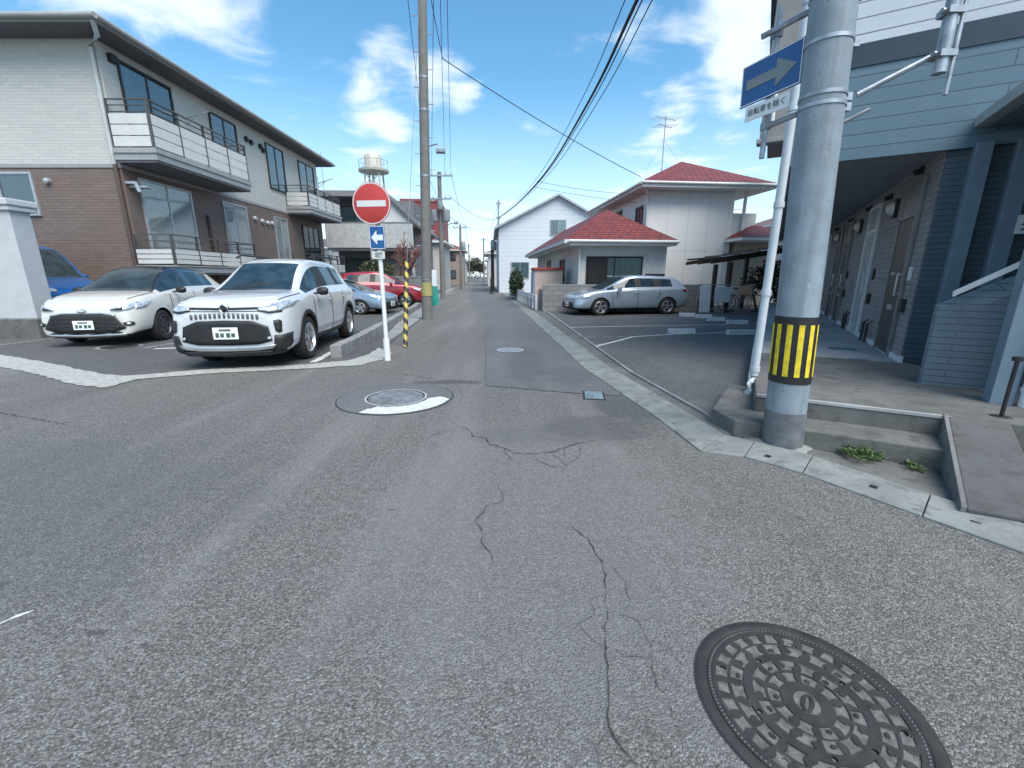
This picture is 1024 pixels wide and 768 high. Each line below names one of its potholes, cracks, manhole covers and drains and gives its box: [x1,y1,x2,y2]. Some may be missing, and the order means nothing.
crack [475,483,504,565]
crack [569,523,686,768]
crack [369,370,643,467]
manhole cover [335,383,454,415]
utility cover [583,391,606,400]
manhole cover [694,622,953,768]
